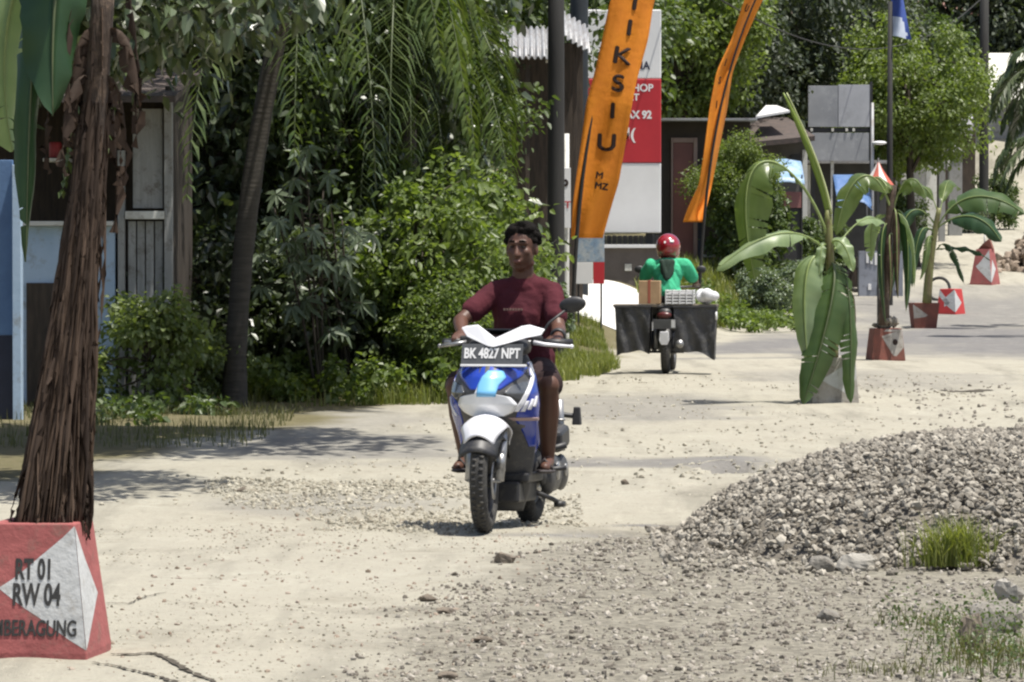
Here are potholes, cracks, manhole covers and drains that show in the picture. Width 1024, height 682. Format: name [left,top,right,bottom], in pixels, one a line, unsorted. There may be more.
crack [92,652,217,682]
